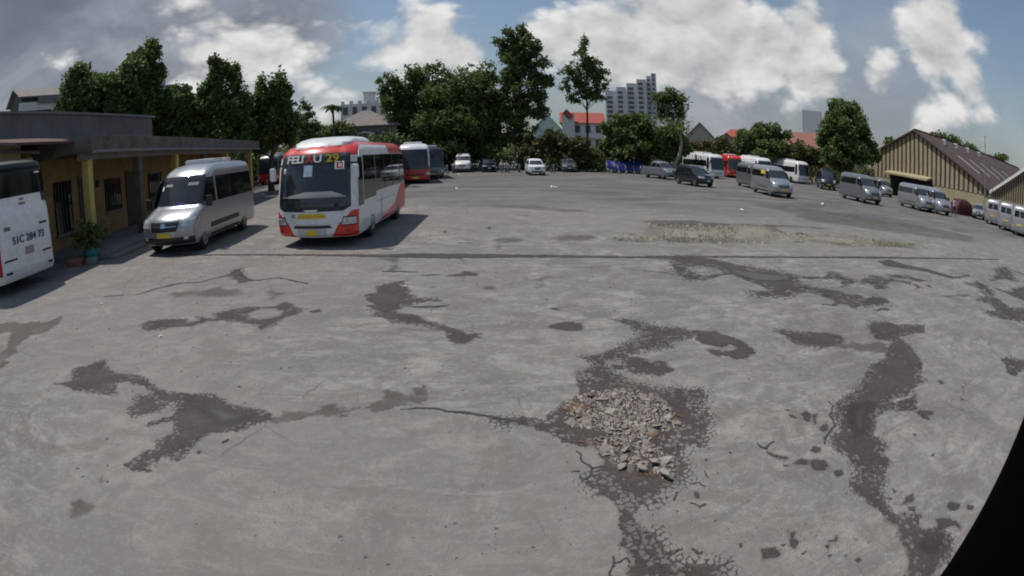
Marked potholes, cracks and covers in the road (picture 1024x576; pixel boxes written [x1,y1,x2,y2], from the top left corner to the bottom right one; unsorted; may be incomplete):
crack [608,555,631,576]
crack [673,471,709,508]
crack [104,270,309,297]
crack [404,407,514,422]
pothole [484,317,743,576]
